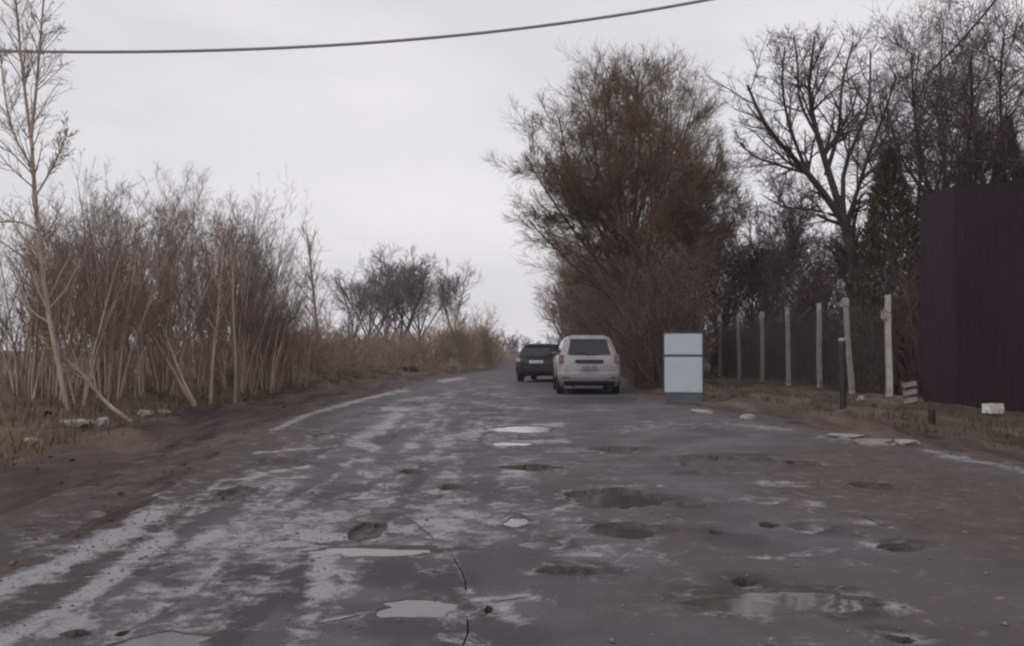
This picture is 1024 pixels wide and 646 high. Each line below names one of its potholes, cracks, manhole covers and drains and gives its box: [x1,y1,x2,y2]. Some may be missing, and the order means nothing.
pothole [217,486,261,502]
pothole [347,522,388,543]
pothole [846,482,912,490]
pothole [563,487,674,510]
pothole [665,588,886,616]
pothole [374,598,466,618]
pothole [591,522,664,539]
pothole [535,566,608,576]
pothole [482,425,557,433]
crack [404,517,528,646]
pothole [503,516,529,527]
pothole [730,577,759,587]
